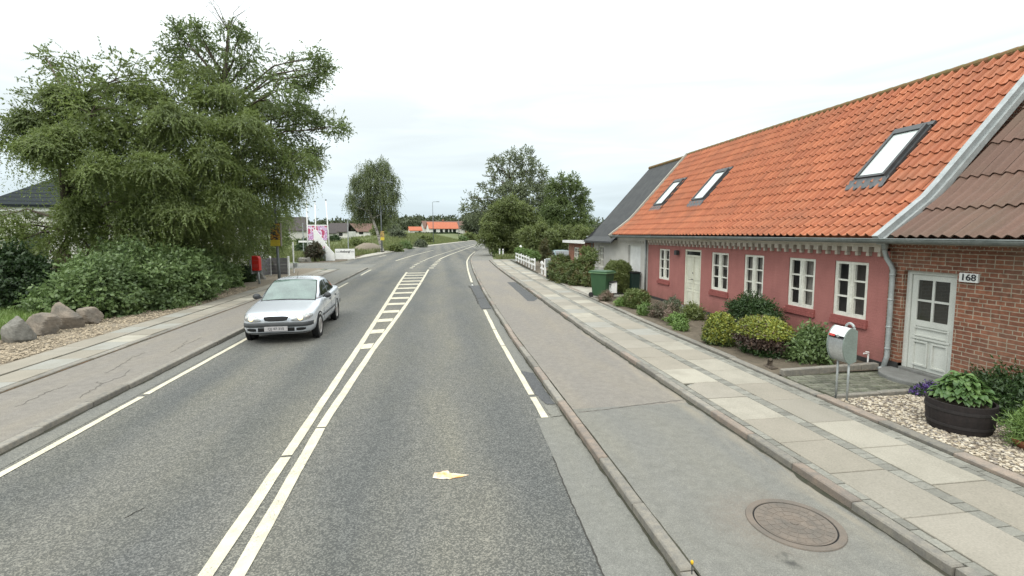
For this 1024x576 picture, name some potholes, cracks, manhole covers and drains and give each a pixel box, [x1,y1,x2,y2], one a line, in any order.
crack [18,354,141,406]
manhole cover [745,499,848,552]
